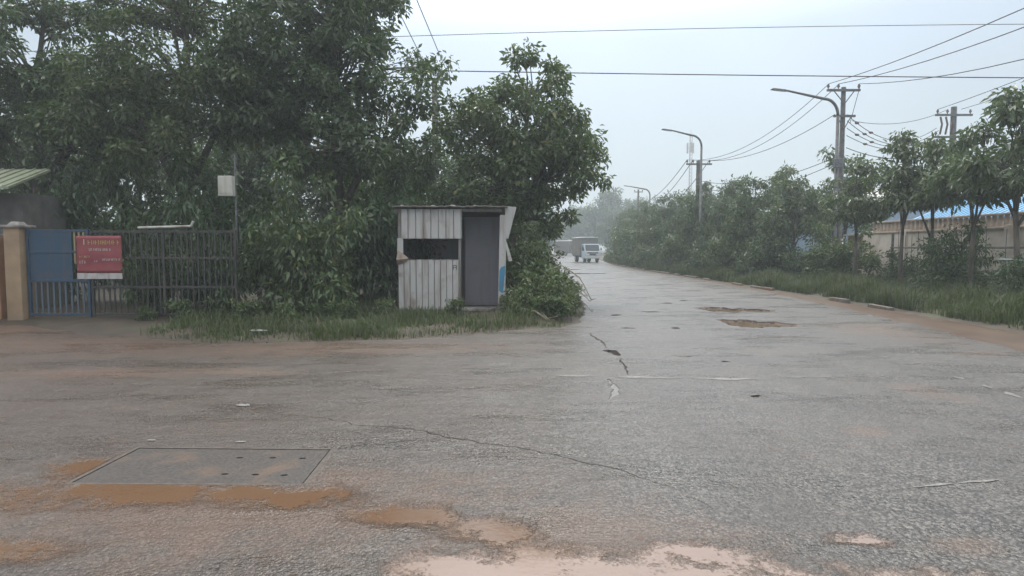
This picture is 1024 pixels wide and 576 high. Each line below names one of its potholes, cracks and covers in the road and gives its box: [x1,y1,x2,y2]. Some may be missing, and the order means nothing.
pothole [716,319,799,328]
crack [590,334,629,401]
manhole cover [65,447,335,485]
crack [274,413,711,508]
